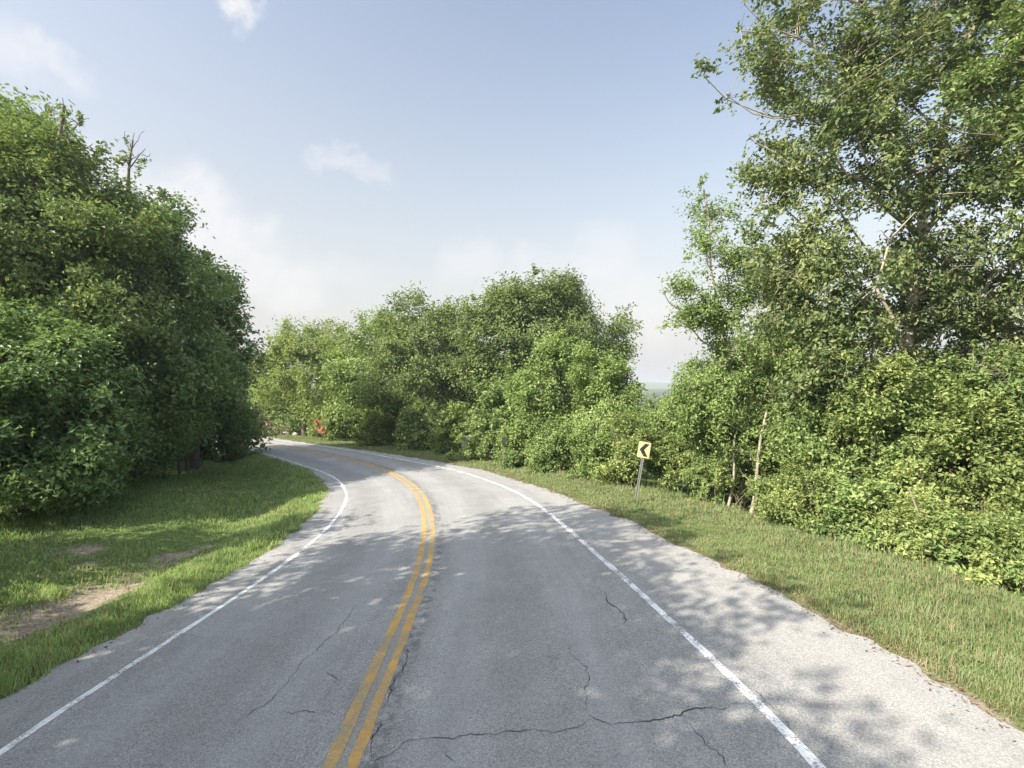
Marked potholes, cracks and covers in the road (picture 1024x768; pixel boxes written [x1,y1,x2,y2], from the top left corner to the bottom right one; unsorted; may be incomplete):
crack [248,614,350,716]
crack [367,644,735,768]
